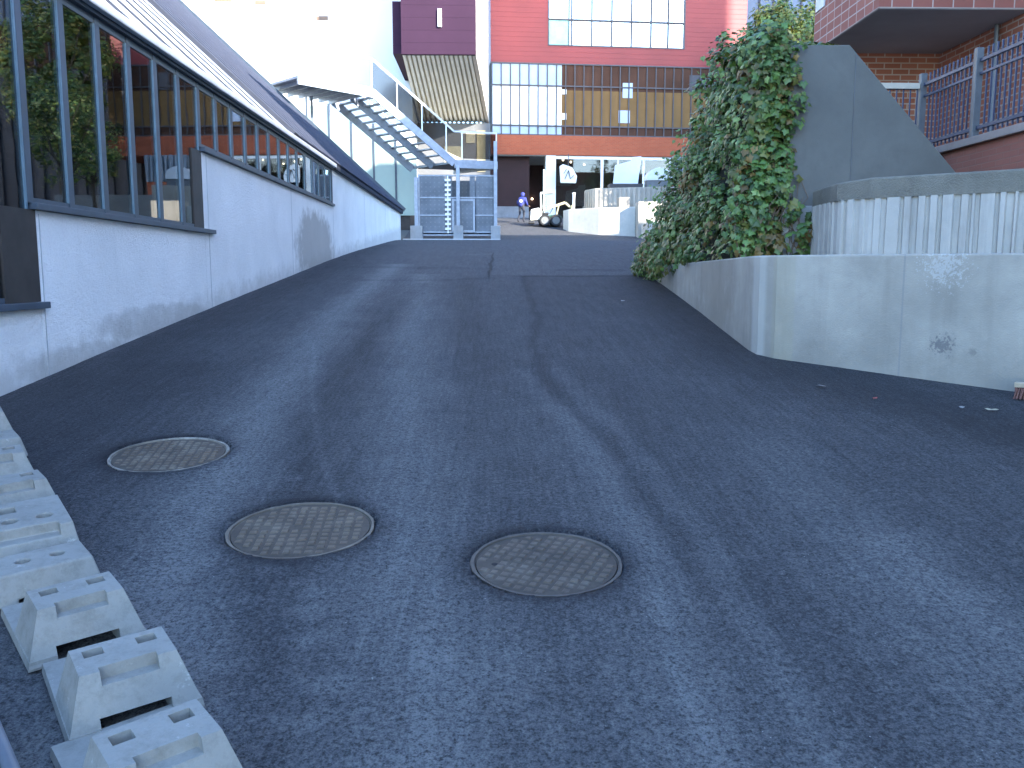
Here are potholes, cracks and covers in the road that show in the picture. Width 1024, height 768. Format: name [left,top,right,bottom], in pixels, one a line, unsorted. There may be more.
manhole cover [225,502,374,559]
manhole cover [107,437,230,472]
crack [487,253,495,277]
manhole cover [470,532,622,597]
